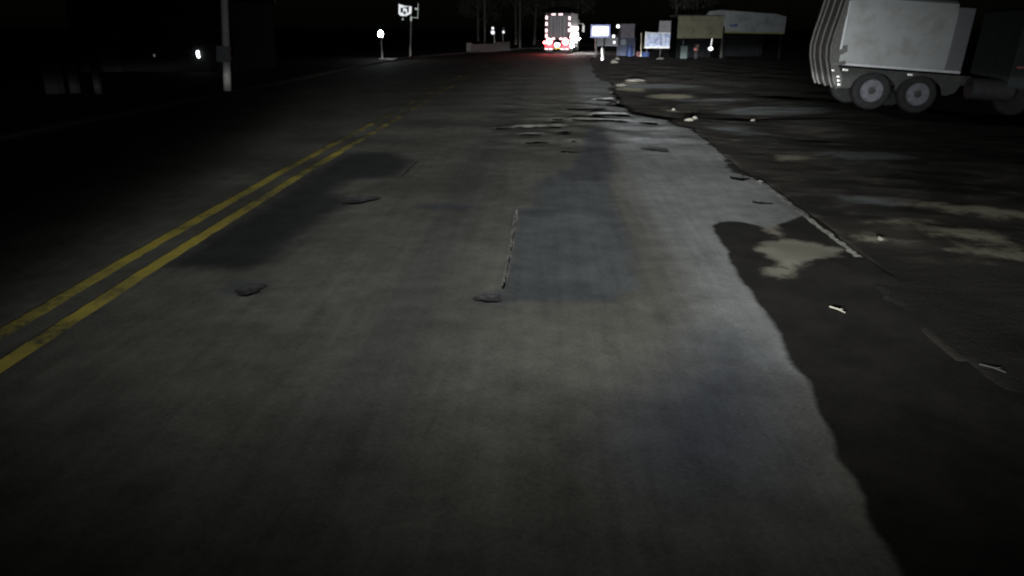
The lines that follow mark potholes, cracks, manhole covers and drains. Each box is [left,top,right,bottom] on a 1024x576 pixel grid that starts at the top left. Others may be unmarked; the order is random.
pothole [234,284,268,297]
pothole [472,294,502,303]
pothole [338,196,381,205]
crack [502,210,518,290]
